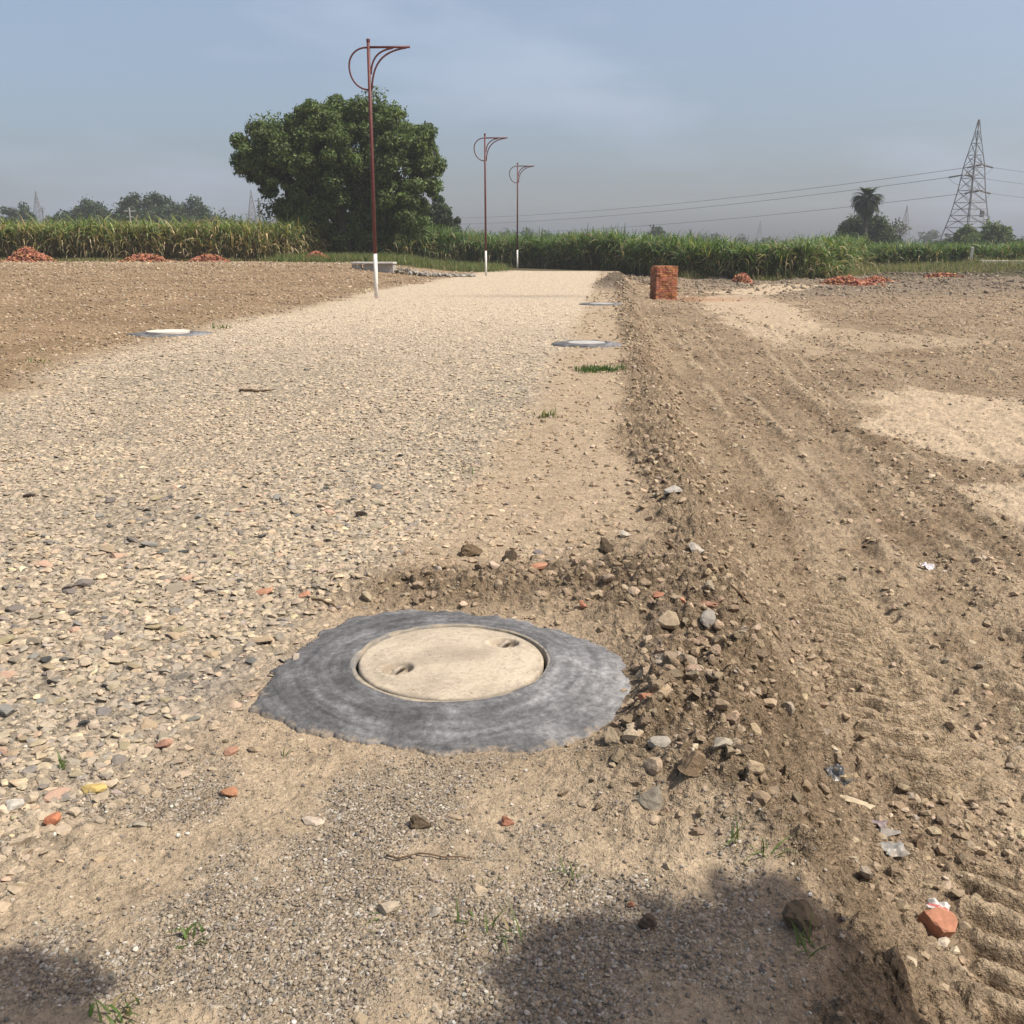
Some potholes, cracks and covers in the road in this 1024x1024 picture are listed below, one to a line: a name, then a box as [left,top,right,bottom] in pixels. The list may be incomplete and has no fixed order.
manhole cover [551,340,622,348]
manhole cover [249,609,631,757]
manhole cover [126,329,212,338]
